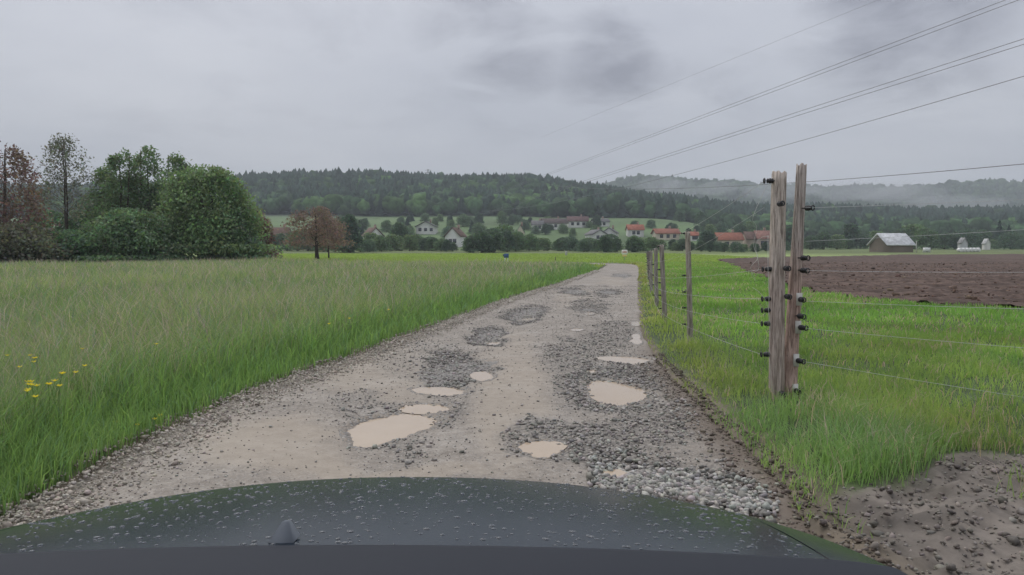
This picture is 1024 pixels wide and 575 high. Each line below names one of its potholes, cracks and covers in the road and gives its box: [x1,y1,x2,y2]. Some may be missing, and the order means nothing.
pothole [508,307,546,319]
pothole [509,438,572,460]
pothole [406,386,475,397]
pothole [589,354,657,365]
pothole [338,412,452,450]
pothole [628,331,643,346]
pothole [394,402,459,415]
pothole [414,359,500,386]
pothole [579,378,664,408]
